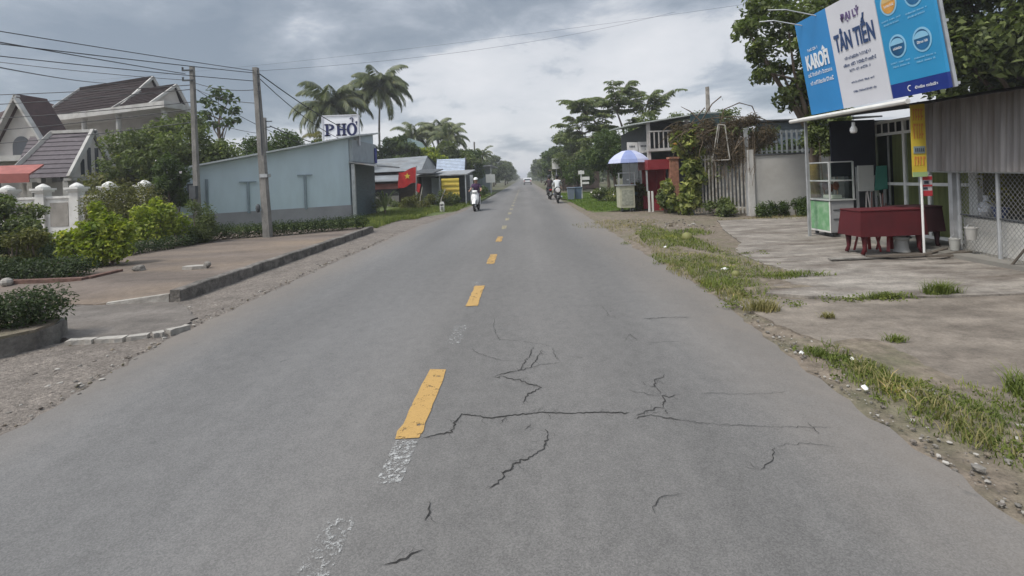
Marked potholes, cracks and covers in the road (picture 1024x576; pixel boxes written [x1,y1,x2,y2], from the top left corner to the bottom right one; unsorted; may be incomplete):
crack [421,319,835,489]
crack [383,545,421,565]
